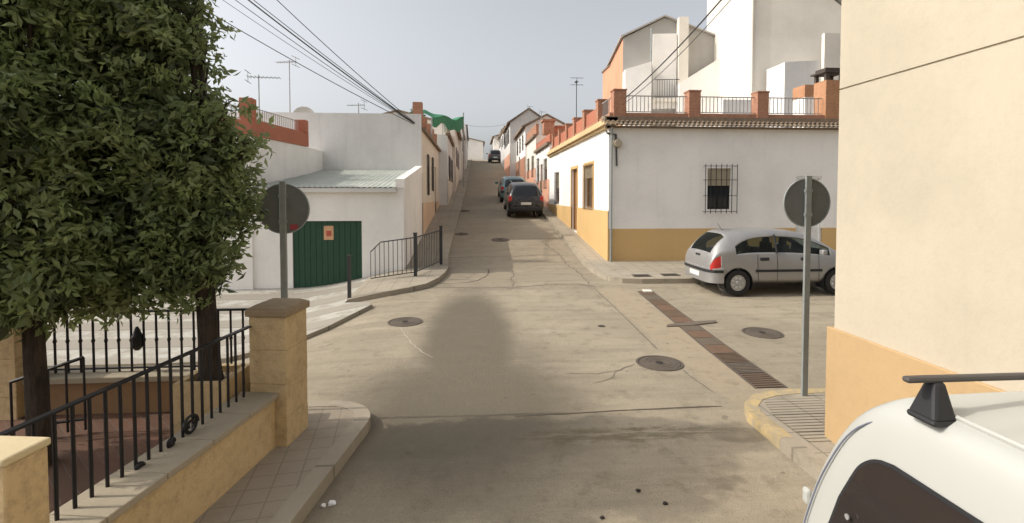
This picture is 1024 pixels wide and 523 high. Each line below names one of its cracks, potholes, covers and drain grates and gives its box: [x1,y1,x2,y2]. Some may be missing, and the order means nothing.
crack [570,364,634,383]
manhole cover [742,327,784,339]
manhole cover [636,355,684,371]
manhole cover [387,317,423,327]
